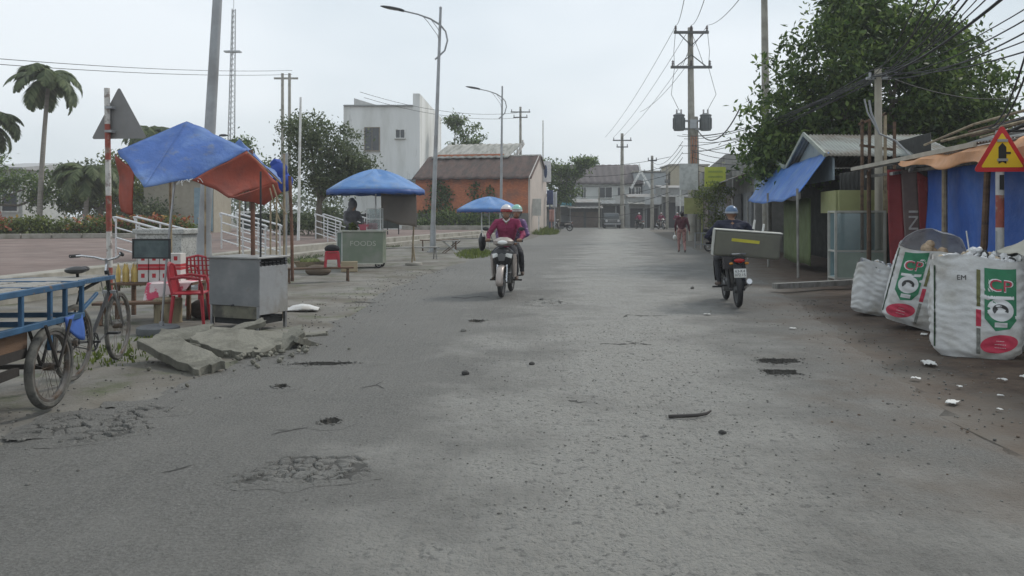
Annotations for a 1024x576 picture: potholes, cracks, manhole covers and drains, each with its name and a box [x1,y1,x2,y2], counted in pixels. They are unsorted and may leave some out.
crack [4,401,195,472]
pothole [302,413,358,430]
